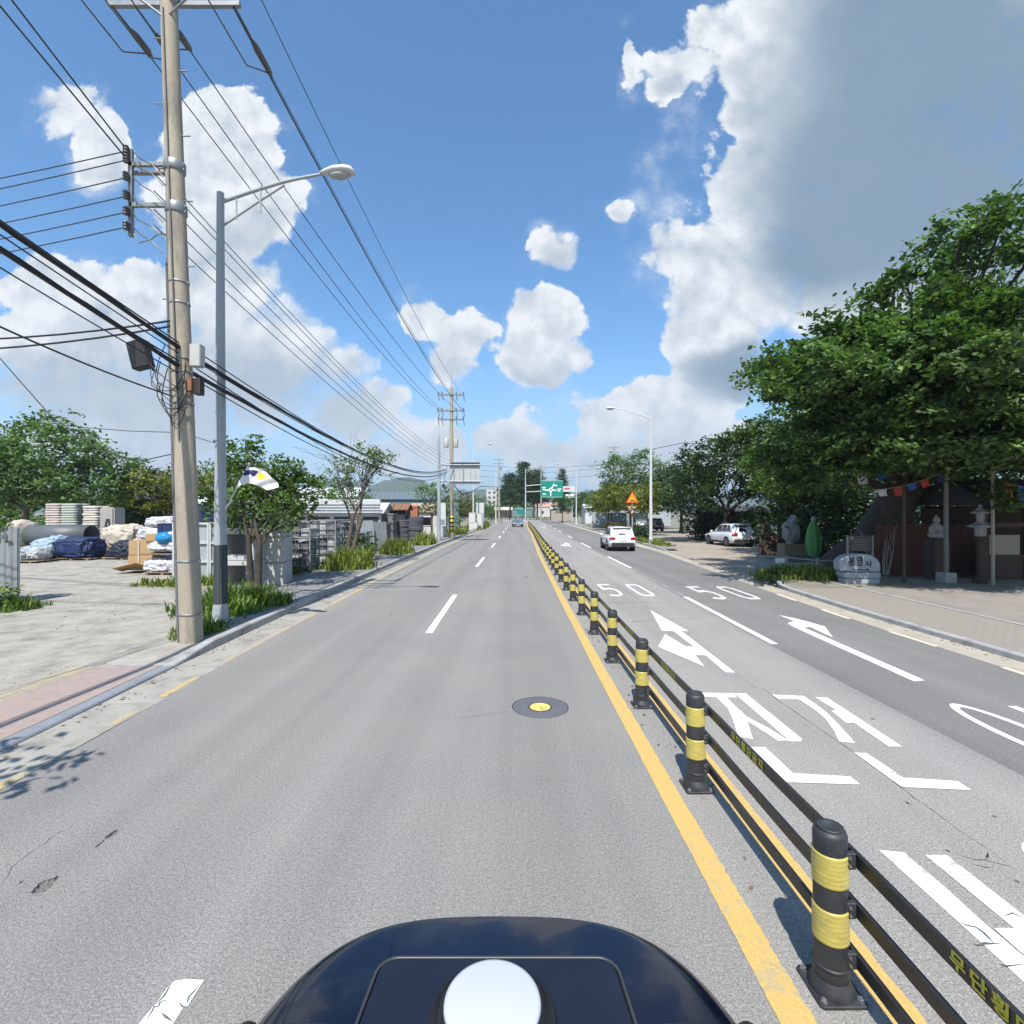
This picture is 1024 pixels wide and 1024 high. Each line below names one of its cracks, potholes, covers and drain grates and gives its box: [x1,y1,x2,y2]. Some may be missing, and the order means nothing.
pothole [31,876,59,894]
manhole cover [512,697,569,718]
